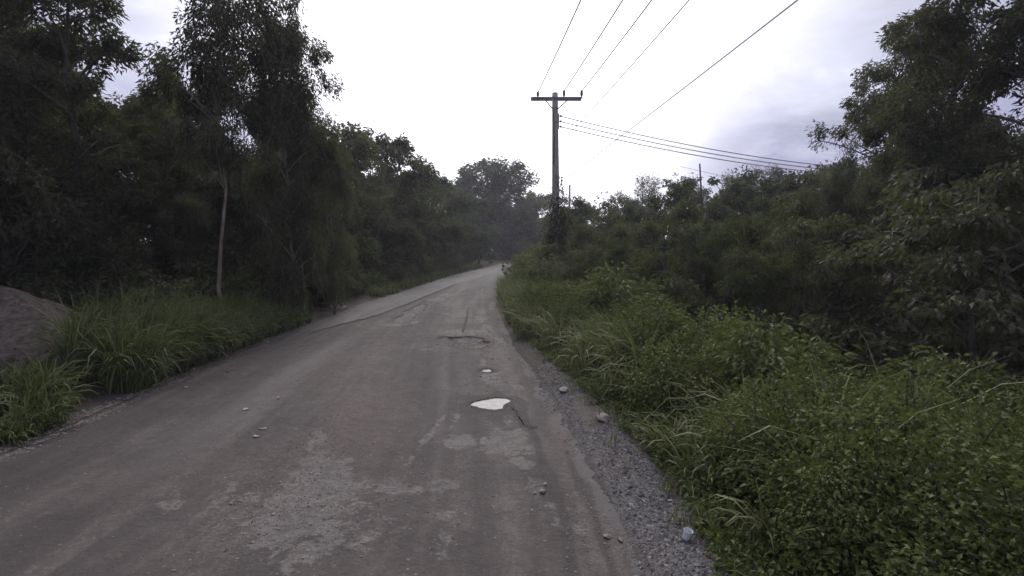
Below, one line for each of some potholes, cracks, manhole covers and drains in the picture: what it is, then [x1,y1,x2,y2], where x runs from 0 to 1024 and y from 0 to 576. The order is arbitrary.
crack [309,284,470,335]
crack [509,394,614,504]
pothole [463,396,518,411]
pothole [432,336,495,349]
